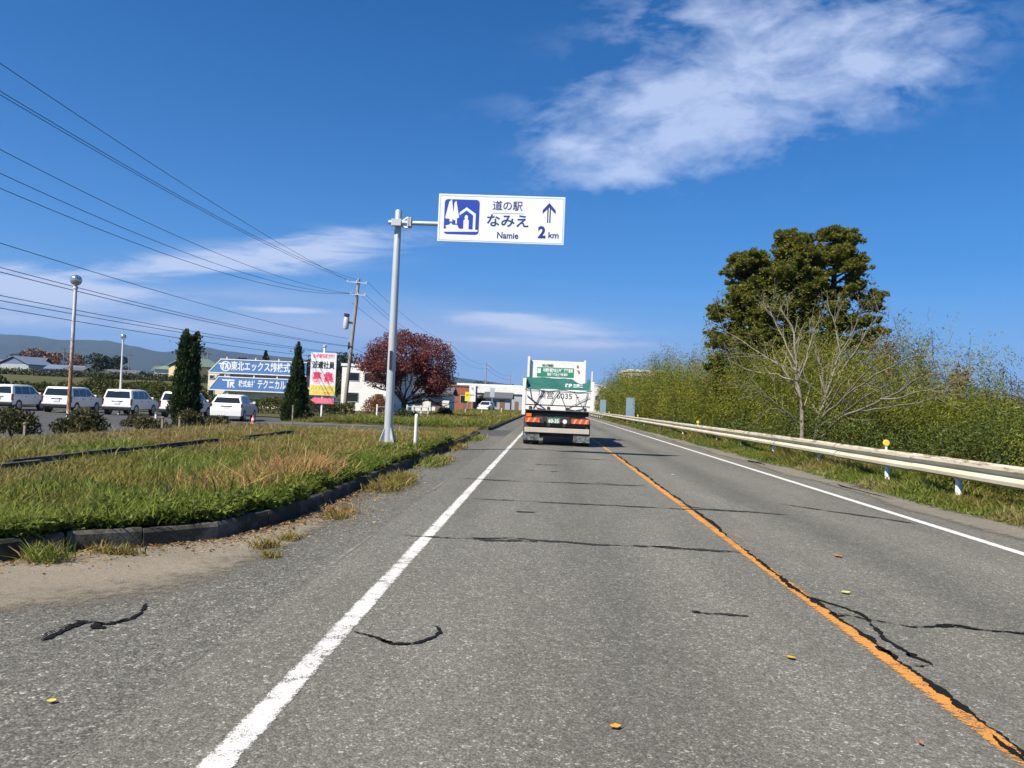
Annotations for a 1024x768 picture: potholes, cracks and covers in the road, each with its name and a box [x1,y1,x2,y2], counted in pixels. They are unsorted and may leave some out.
crack [354,625,442,645]
crack [401,454,1024,760]
